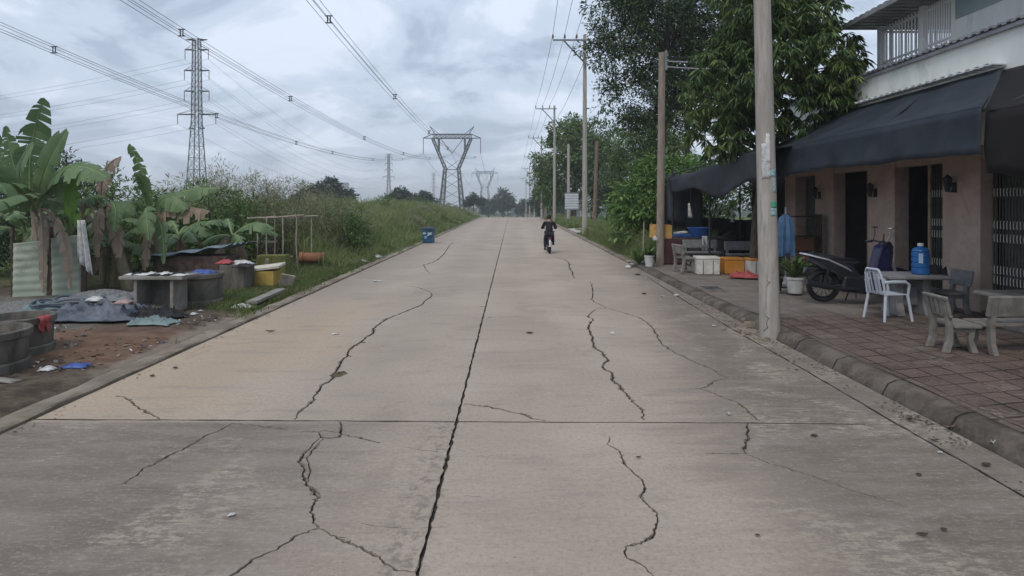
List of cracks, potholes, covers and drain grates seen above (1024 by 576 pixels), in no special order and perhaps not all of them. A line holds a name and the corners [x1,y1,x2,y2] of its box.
crack [554,256,905,576]
crack [122,245,450,576]
crack [464,404,545,421]
